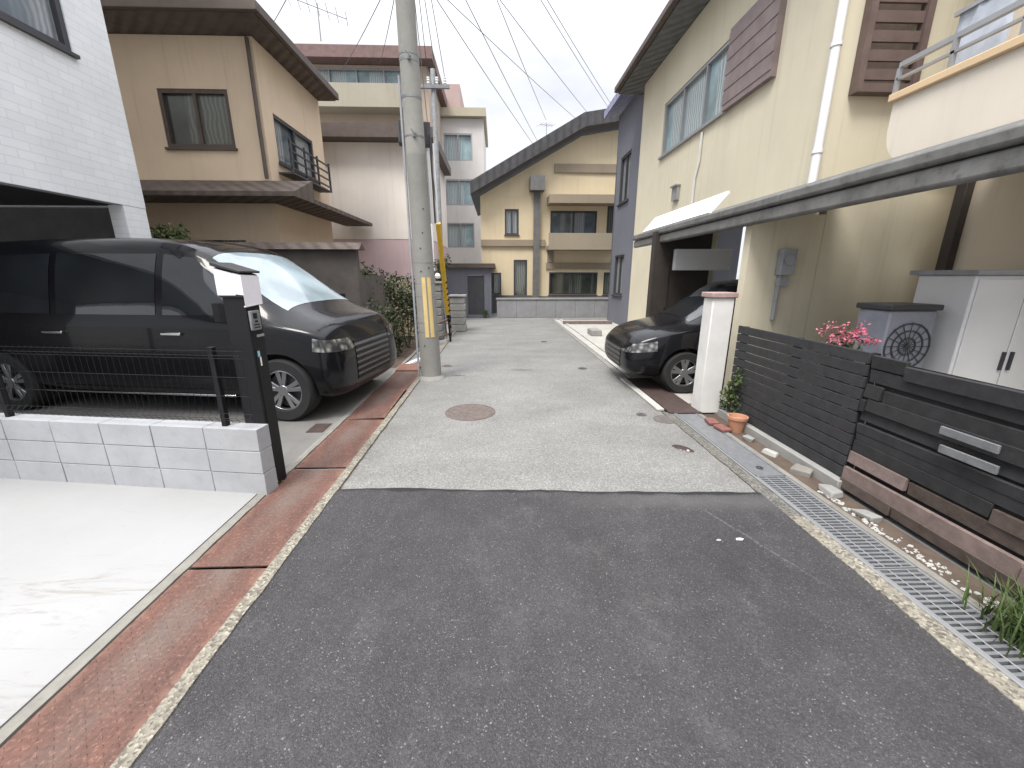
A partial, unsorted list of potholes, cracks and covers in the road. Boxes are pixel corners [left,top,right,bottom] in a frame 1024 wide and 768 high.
manhole cover [653,415,675,424]
manhole cover [445,404,496,421]
drain grate [757,476,916,569]
drain grate [875,568,1024,685]
